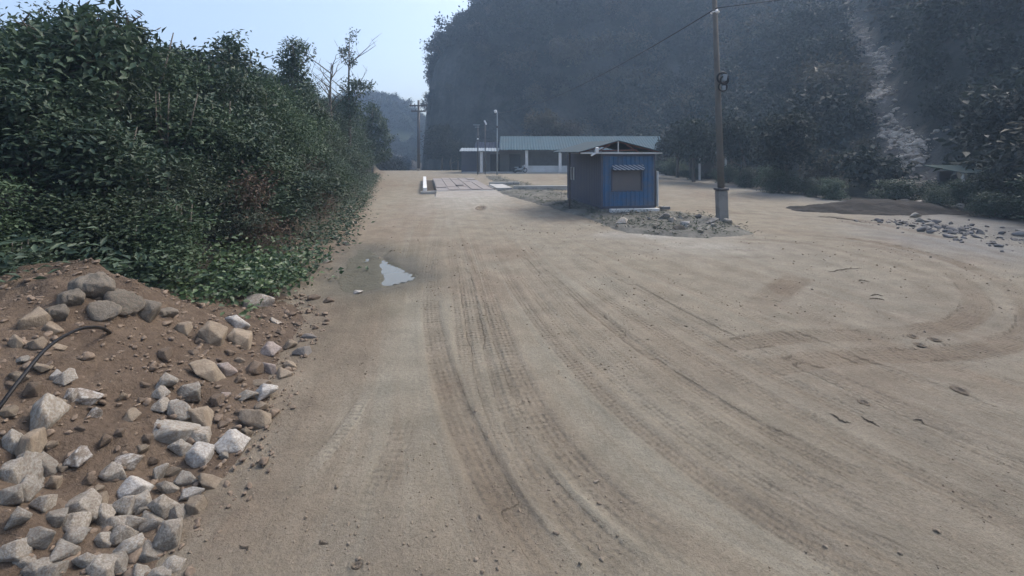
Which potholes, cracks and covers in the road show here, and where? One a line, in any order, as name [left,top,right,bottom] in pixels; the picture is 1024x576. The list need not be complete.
pothole [337,249,419,292]
